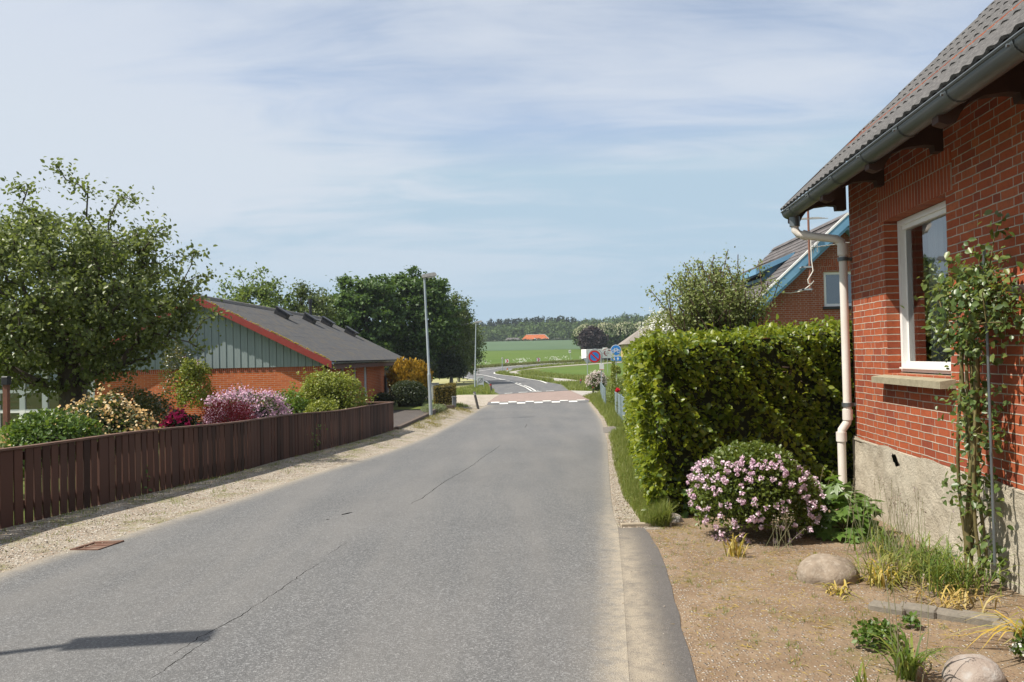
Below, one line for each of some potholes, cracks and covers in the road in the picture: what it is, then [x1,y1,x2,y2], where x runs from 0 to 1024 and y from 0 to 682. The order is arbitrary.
crack [149,546,340,681]
